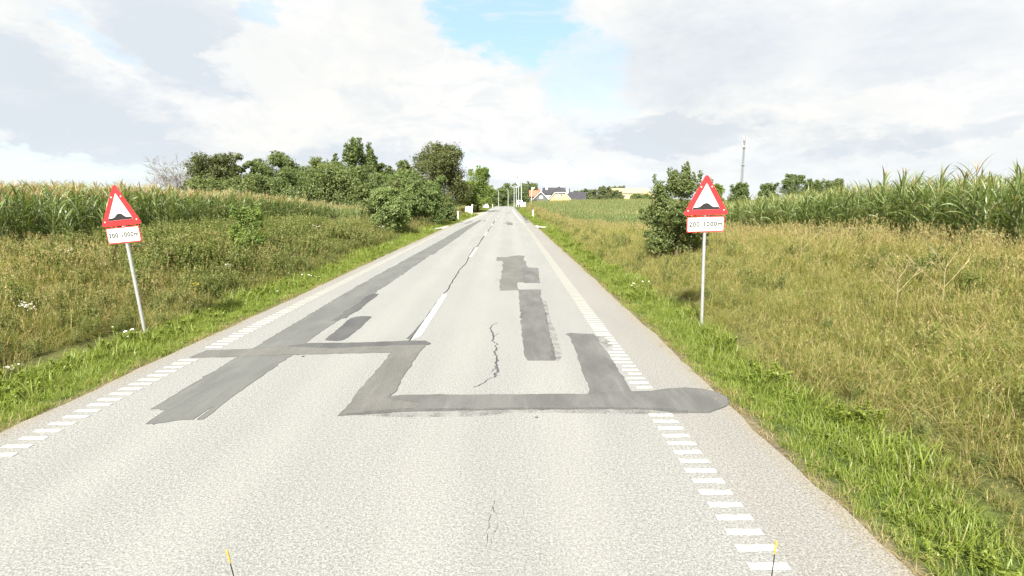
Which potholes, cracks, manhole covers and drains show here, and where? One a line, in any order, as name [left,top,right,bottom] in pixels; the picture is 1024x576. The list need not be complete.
crack [474,323,500,387]
crack [409,222,494,341]
